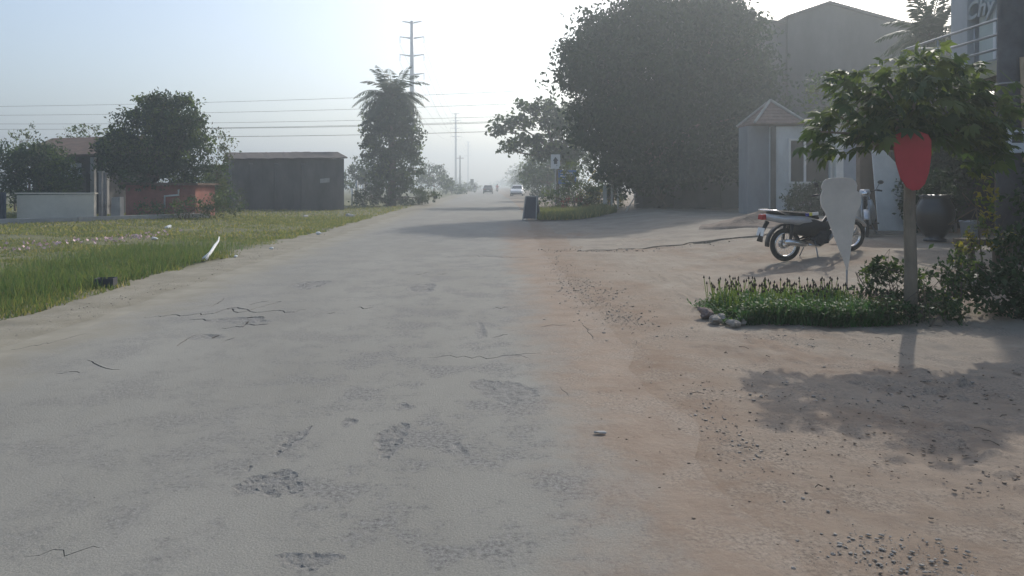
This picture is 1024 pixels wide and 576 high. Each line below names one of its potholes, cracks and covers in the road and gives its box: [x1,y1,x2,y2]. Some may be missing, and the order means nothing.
pothole [274,551,347,573]
pothole [468,379,540,408]
pothole [231,468,310,498]
pothole [270,425,313,457]
pothole [372,421,411,461]
crack [149,298,303,346]
